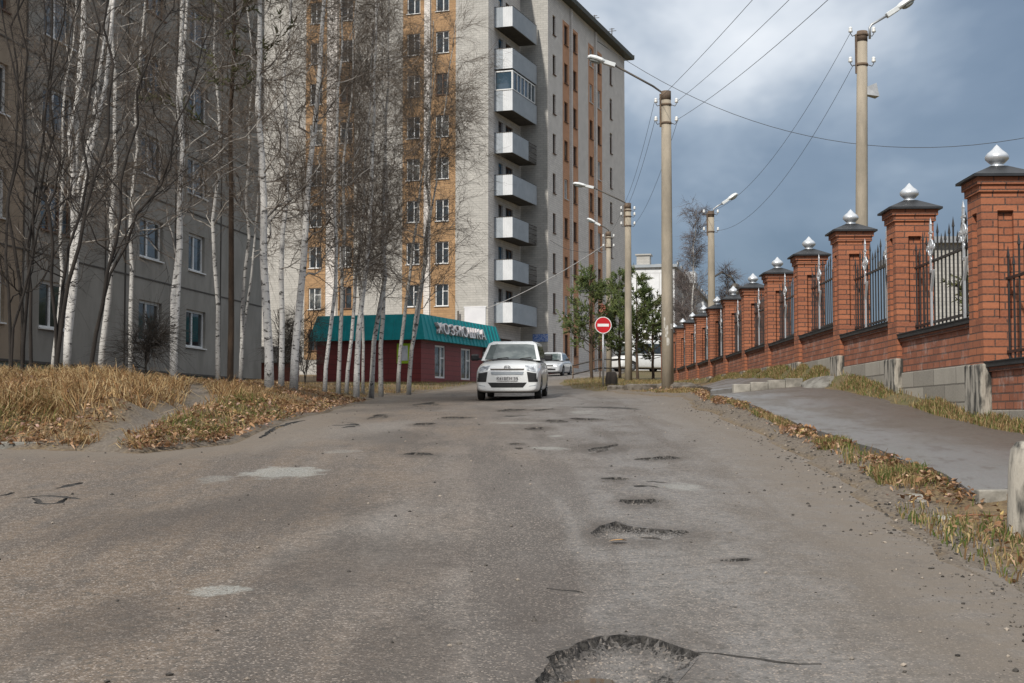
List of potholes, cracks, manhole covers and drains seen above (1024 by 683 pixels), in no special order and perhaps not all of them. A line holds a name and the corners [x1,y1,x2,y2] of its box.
pothole [590,521,689,540]
pothole [535,634,702,683]
crack [259,420,305,438]
pothole [587,444,618,453]
crack [698,652,822,665]
